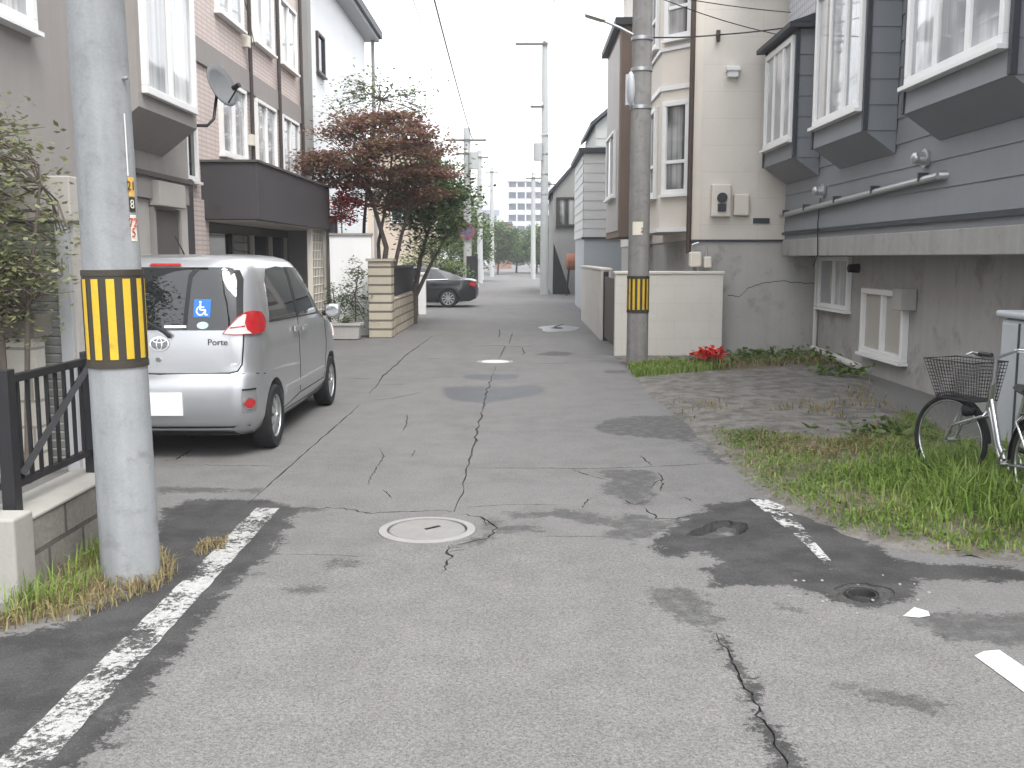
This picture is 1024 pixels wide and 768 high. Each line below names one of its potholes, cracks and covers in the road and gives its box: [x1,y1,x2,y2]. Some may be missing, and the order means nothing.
crack [292,450,545,573]
pothole [687,520,748,539]
manhole cover [378,517,476,550]
crack [561,456,710,519]
crack [716,633,789,768]
pothole [834,583,895,604]
crack [224,336,439,504]
